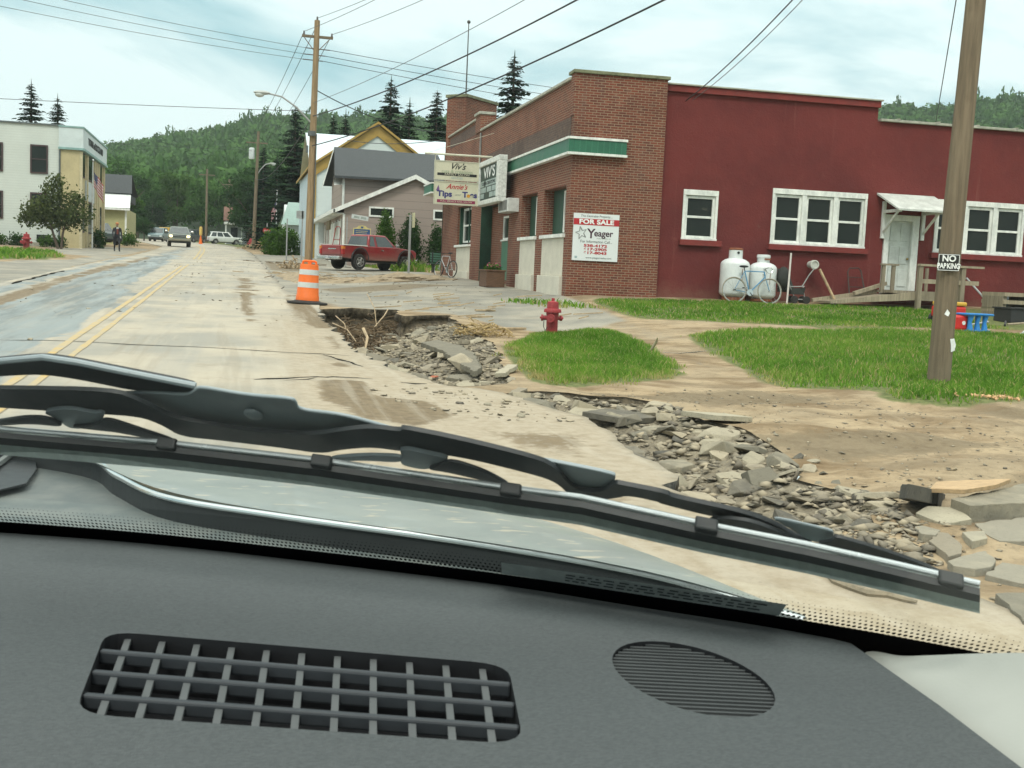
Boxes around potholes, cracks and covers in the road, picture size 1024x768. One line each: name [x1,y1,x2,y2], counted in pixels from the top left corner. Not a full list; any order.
pothole [321,308,510,387]
pothole [507,391,901,530]
crack [43,340,366,380]
